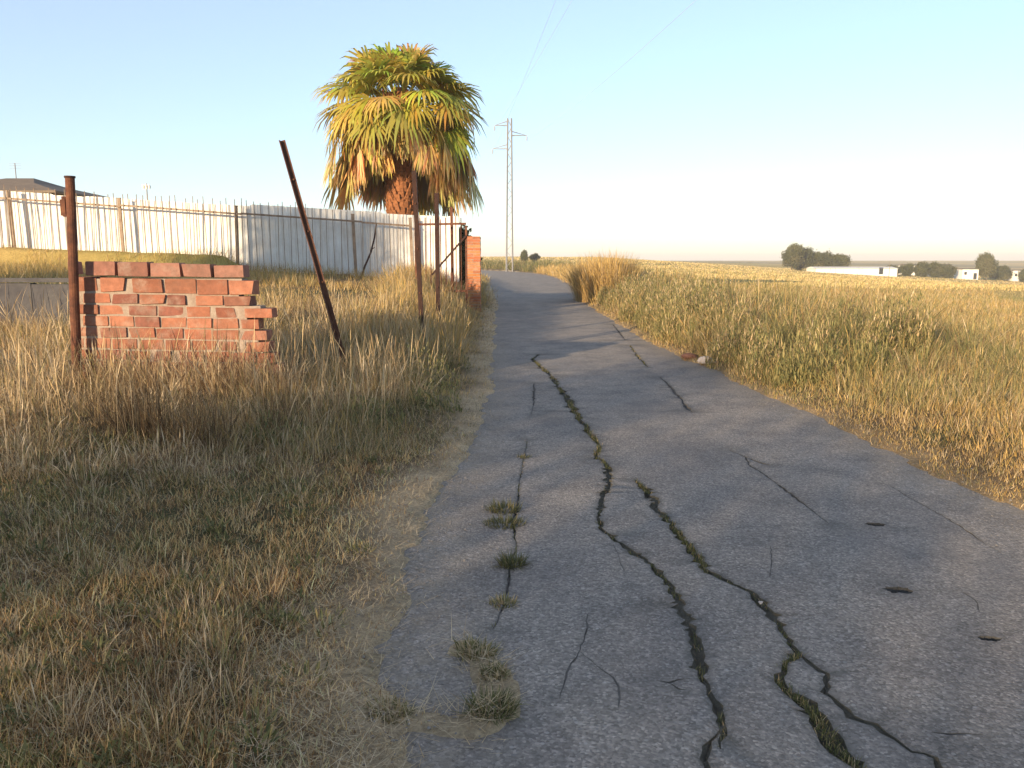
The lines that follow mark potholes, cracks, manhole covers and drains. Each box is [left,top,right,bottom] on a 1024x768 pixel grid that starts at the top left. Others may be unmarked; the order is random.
pothole [881,586,913,594]
crack [891,486,1001,553]
crack [494,354,982,768]
